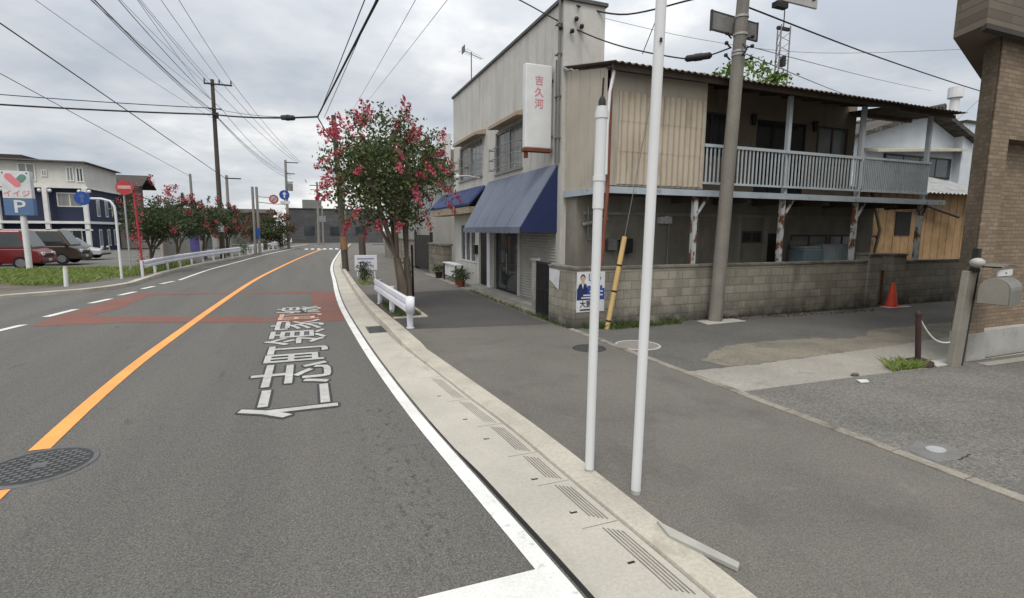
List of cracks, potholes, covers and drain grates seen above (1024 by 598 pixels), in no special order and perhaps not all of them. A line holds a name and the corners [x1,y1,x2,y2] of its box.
utility cover [904,443,963,462]
manhole cover [0,446,100,490]
manhole cover [615,340,661,350]
manhole cover [572,344,606,352]
